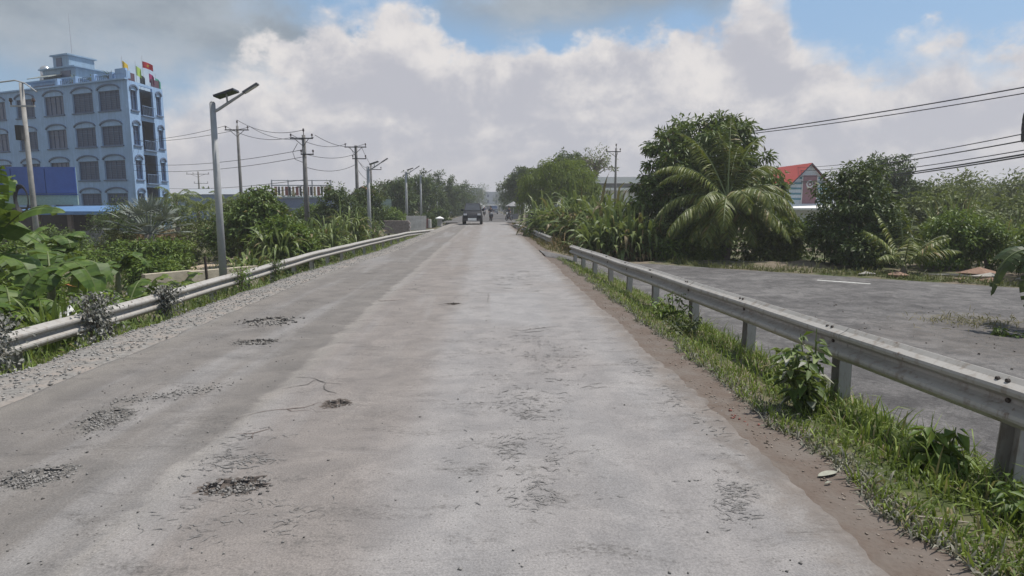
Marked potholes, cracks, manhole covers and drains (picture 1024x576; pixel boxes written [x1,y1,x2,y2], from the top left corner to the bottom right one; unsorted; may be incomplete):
pothole [57,405,149,440]
crack [178,377,340,478]
pothole [228,338,285,347]
pothole [0,460,95,498]
pothole [237,315,305,328]
pothole [309,396,362,412]
pothole [179,472,285,504]
